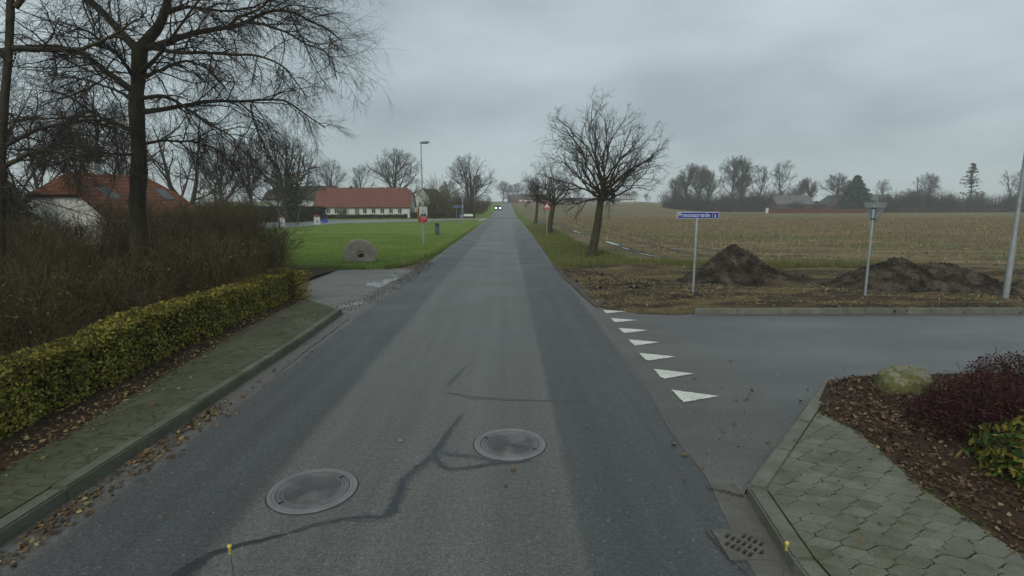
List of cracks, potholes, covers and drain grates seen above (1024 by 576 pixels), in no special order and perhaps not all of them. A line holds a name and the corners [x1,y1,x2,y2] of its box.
manhole cover [473,428,547,461]
drain grate [711,529,780,561]
manhole cover [265,468,359,515]
